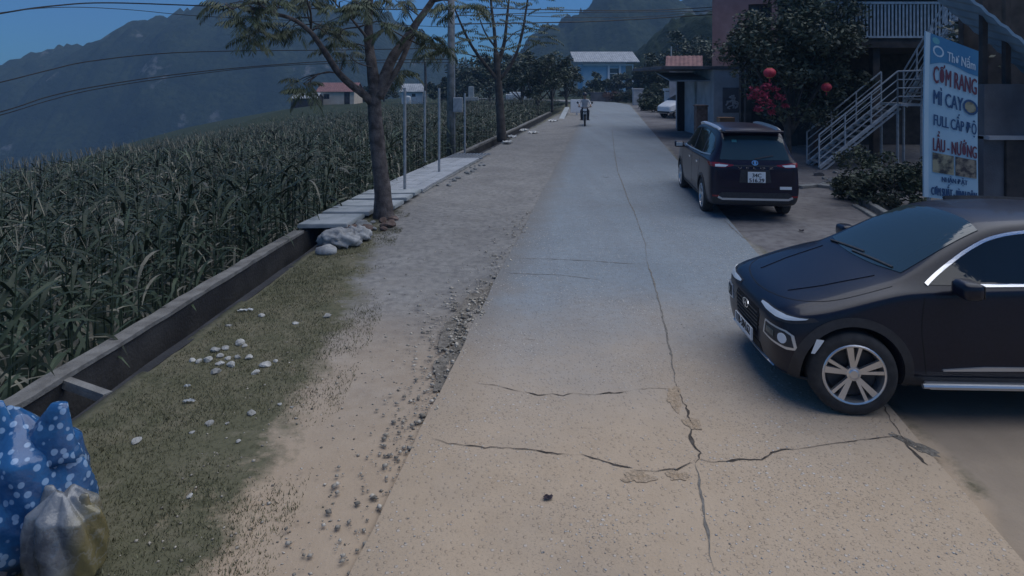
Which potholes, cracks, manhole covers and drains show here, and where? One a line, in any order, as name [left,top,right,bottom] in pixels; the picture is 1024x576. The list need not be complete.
crack [436,384,789,471]
crack [884,406,928,465]
